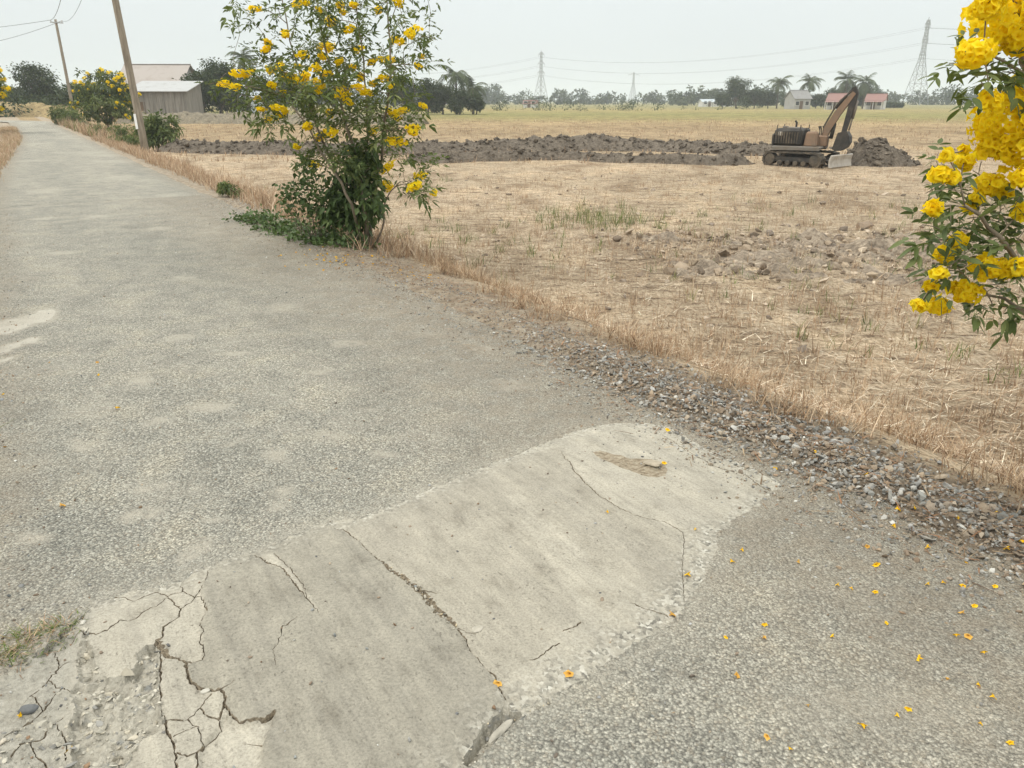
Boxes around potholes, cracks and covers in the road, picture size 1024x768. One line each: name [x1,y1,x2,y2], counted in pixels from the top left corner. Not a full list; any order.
crack [4,570,276,768]
crack [562,454,685,597]
crack [337,529,506,700]
pothole [593,451,667,477]
crack [254,554,319,665]
